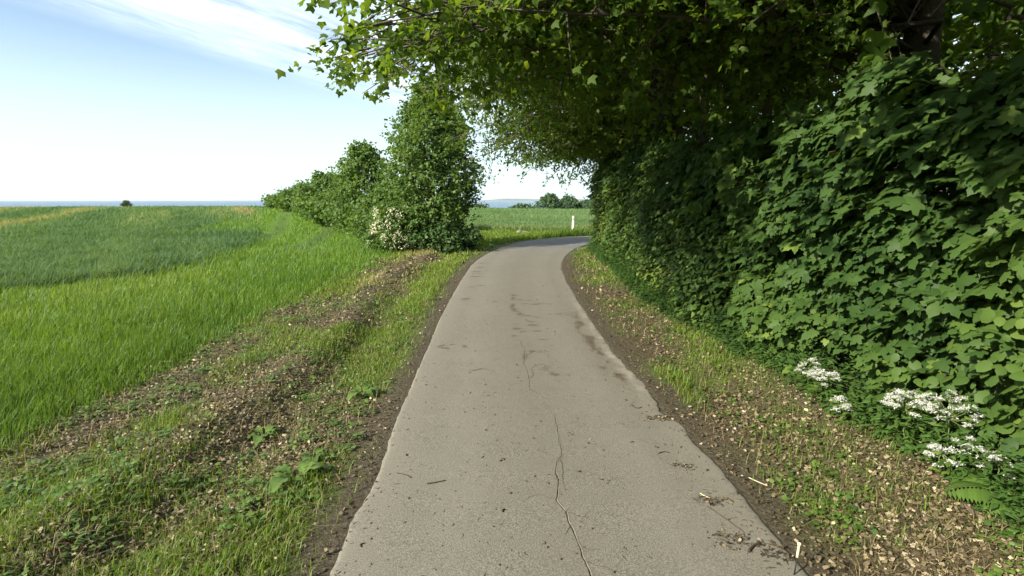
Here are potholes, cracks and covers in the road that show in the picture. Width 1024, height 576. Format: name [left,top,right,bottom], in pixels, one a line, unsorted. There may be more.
crack [521,345,622,576]
